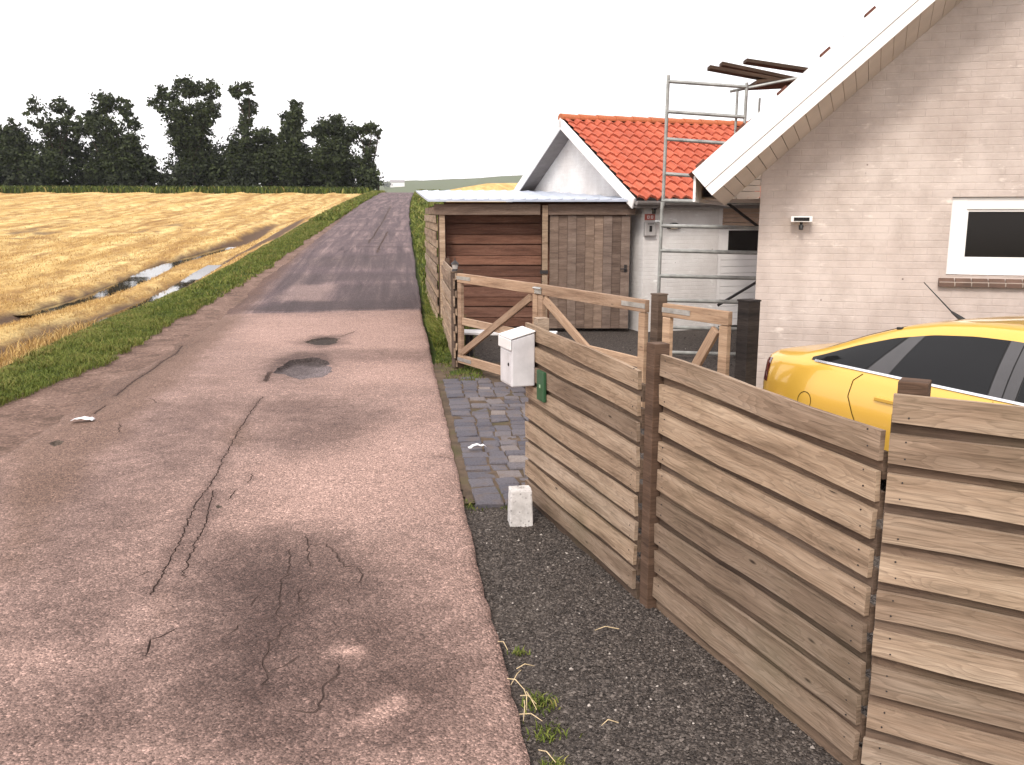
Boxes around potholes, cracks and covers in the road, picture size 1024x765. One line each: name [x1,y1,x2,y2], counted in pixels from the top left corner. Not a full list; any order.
crack [361,206,391,258]
crack [145,628,176,656]
crack [94,345,184,433]
crack [128,372,273,595]
pothole [273,357,333,380]
pothole [306,337,340,345]
crack [225,535,364,714]
